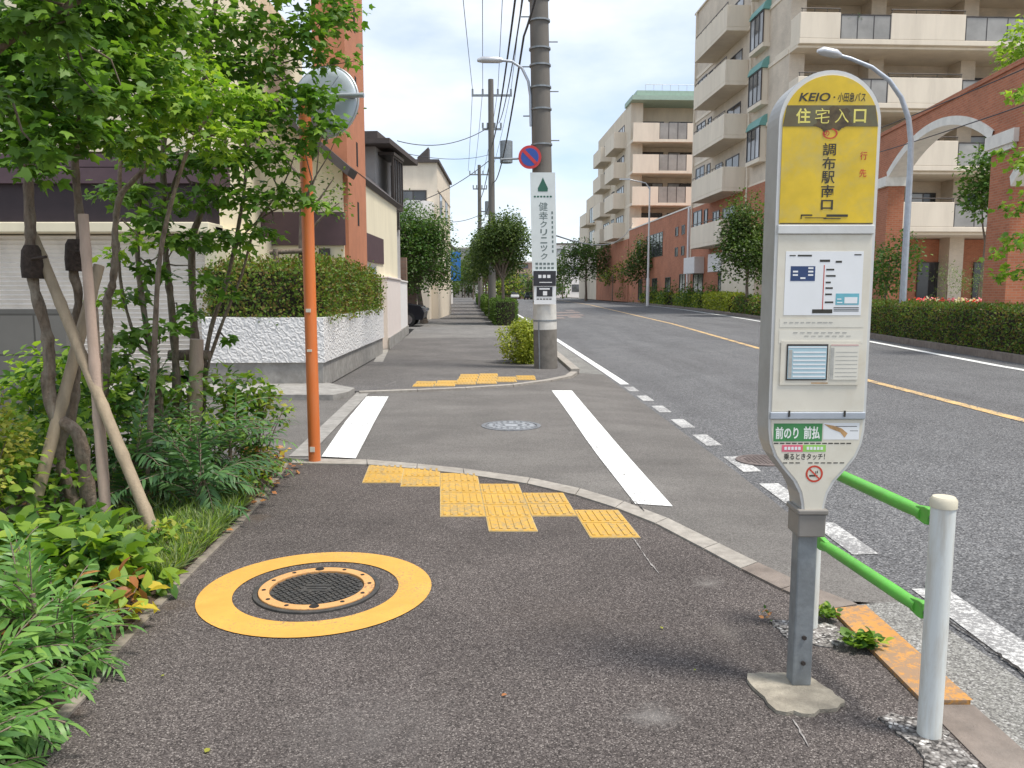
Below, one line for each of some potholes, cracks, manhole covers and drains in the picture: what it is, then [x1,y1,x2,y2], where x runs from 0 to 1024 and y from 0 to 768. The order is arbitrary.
manhole cover [481,420,541,431]
manhole cover [252,566,380,615]
manhole cover [736,454,775,467]
